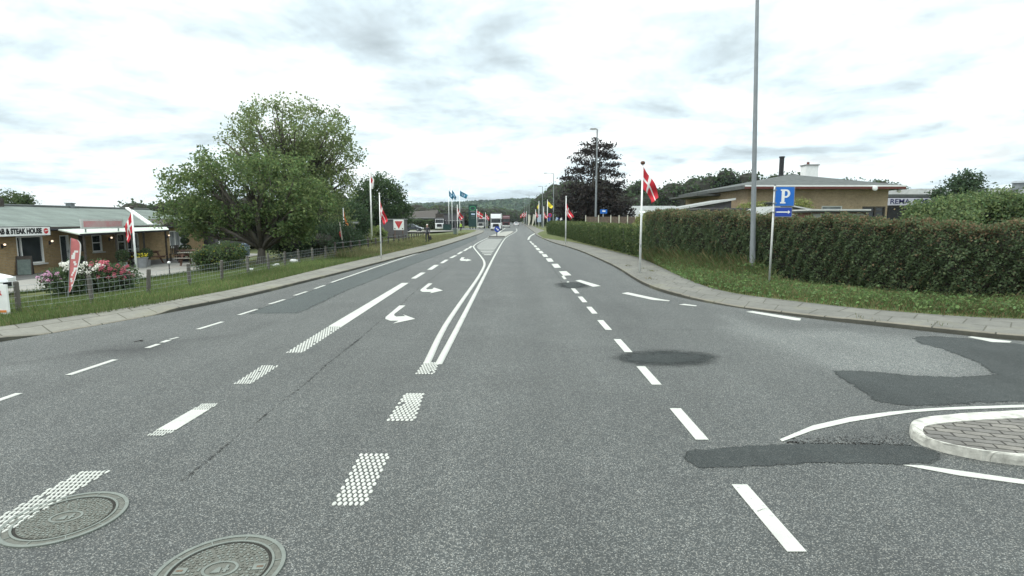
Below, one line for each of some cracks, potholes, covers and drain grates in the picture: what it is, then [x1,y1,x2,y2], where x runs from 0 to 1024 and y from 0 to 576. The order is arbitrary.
manhole cover [153,534,286,576]
manhole cover [0,491,129,548]
